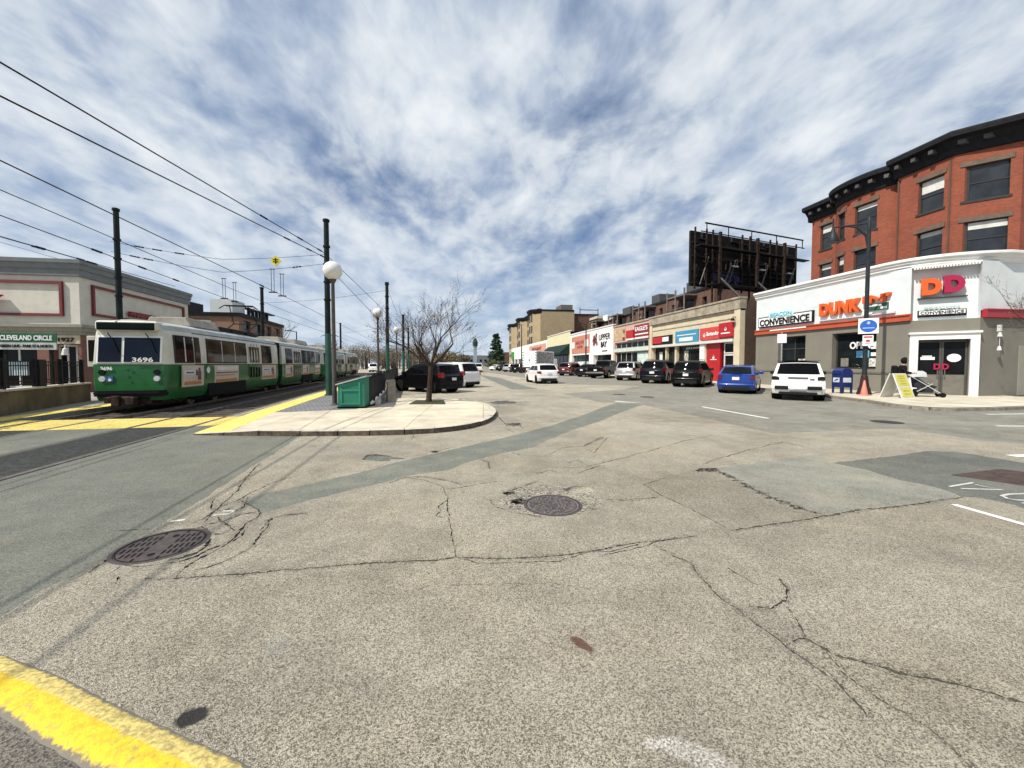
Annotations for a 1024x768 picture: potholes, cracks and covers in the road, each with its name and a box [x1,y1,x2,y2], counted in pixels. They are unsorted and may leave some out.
crack [102,415,1023,768]
manhole cover [523,495,582,516]
manhole cover [106,528,211,566]
